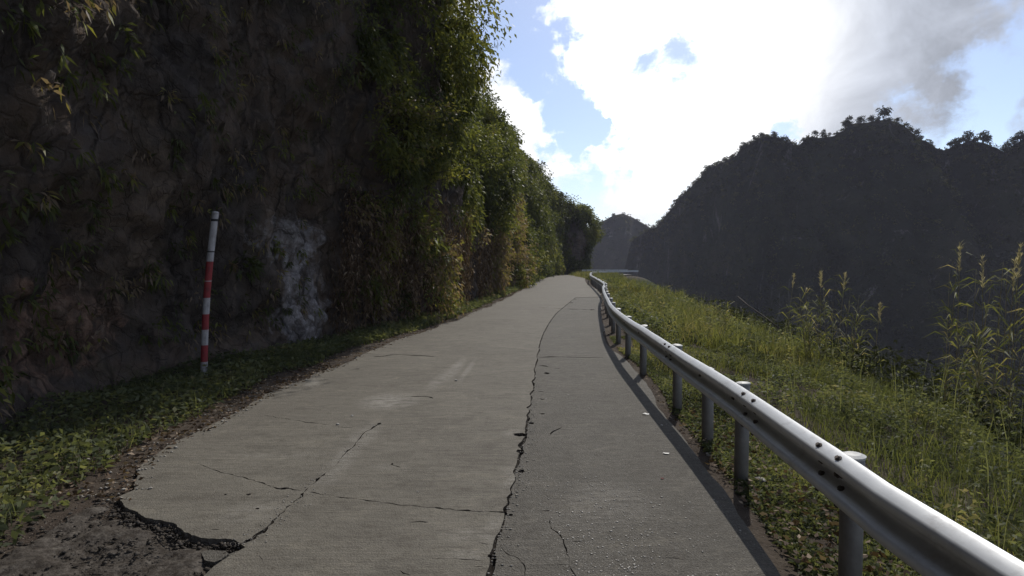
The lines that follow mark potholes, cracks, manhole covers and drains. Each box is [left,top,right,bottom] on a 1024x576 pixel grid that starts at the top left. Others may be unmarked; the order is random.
crack [544,499,584,576]
crack [240,424,379,559]
crack [471,302,570,576]
